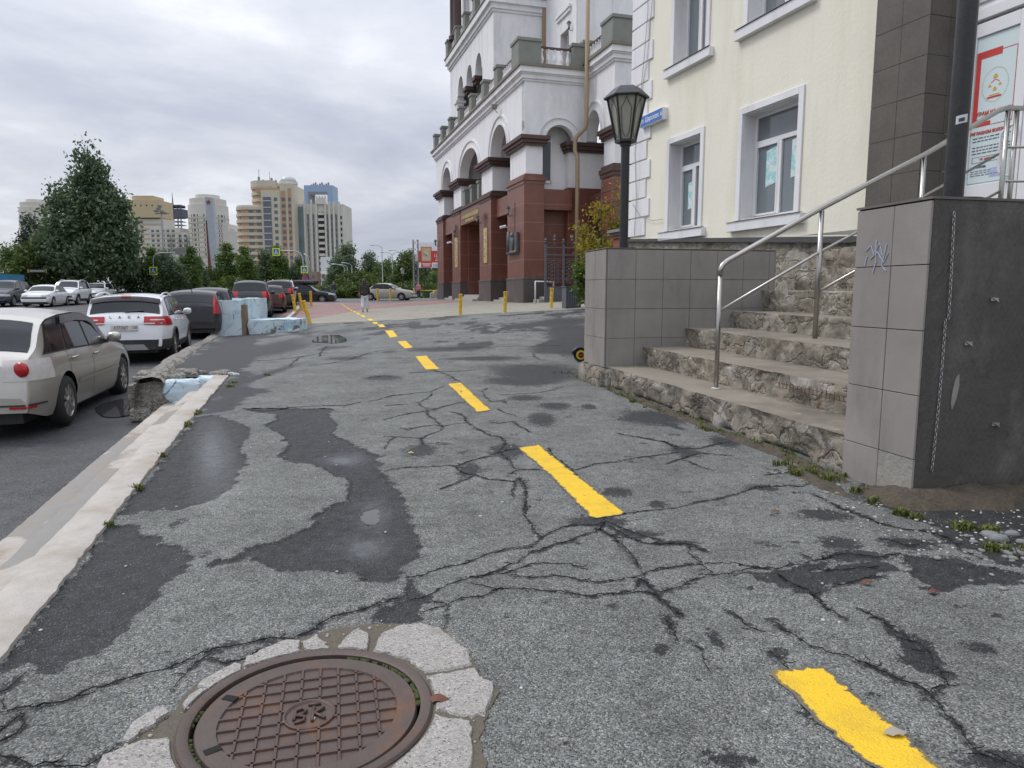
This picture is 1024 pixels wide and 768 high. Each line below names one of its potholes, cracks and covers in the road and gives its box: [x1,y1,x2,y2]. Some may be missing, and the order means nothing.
crack [243,369,561,510]
manhole cover [173,649,433,768]
crack [0,598,398,767]
crack [576,433,731,471]
crack [410,472,1024,768]
